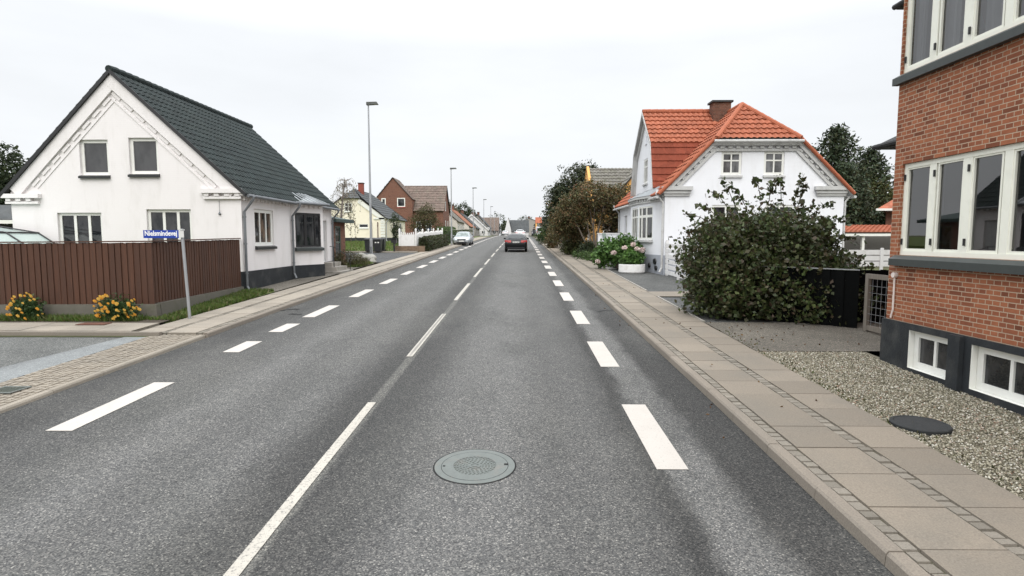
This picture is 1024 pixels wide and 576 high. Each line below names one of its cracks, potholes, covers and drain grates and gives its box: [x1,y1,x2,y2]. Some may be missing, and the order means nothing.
manhole cover [889,415,953,436]
manhole cover [433,449,516,485]
